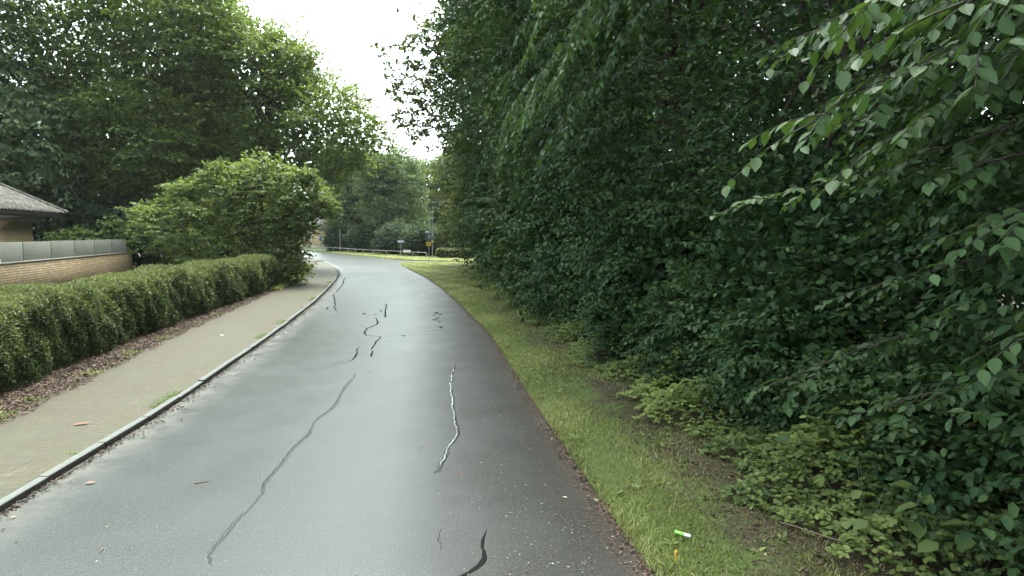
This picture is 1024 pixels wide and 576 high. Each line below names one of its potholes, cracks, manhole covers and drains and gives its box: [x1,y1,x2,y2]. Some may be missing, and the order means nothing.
crack [341,303,387,363]
crack [434,361,460,473]
